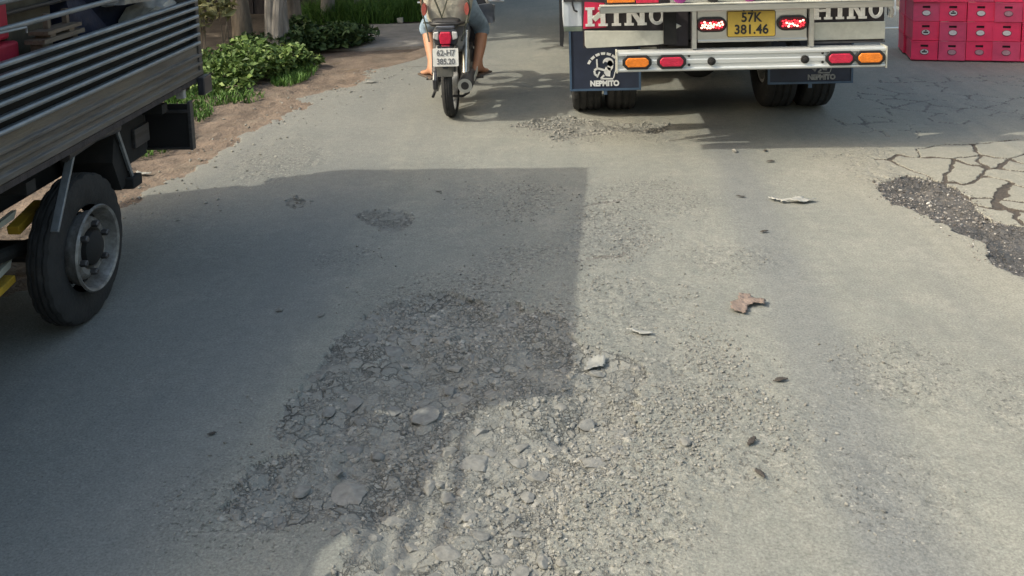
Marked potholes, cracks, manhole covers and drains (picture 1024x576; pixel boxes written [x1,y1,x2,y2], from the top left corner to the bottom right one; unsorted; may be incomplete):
crack [835,75,1024,138]
pothole [216,290,648,576]
pothole [509,115,674,142]
crack [874,139,1024,226]
pothole [356,208,415,232]
pothole [284,195,314,209]
